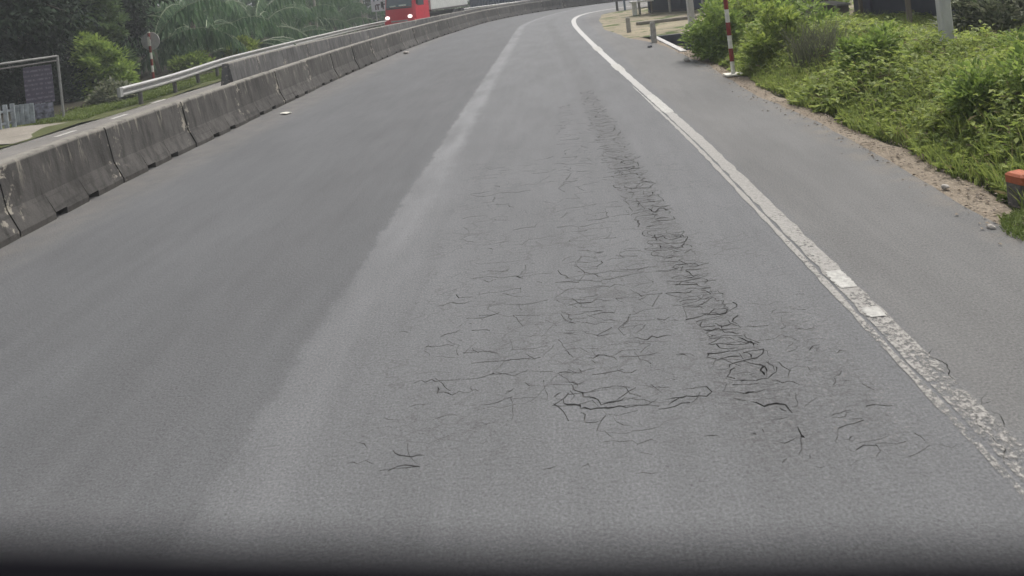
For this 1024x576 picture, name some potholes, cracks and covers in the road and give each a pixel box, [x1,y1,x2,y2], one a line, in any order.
crack [350,156,556,471]
crack [507,93,965,474]
